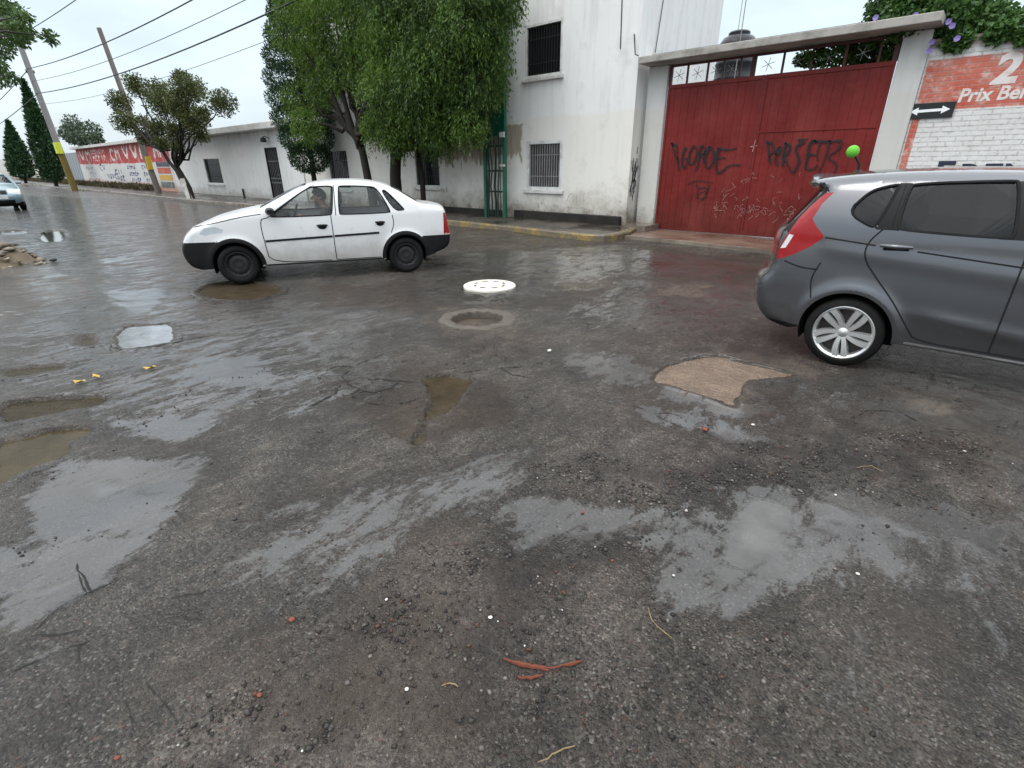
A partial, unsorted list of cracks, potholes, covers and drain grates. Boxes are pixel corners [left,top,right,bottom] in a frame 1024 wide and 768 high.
pothole [0,420,109,493]
pothole [103,321,184,351]
pothole [23,228,80,244]
crack [297,353,421,414]
pothole [0,390,123,428]
pothole [396,370,489,453]
manhole cover [463,279,516,293]
pothole [188,280,289,302]
